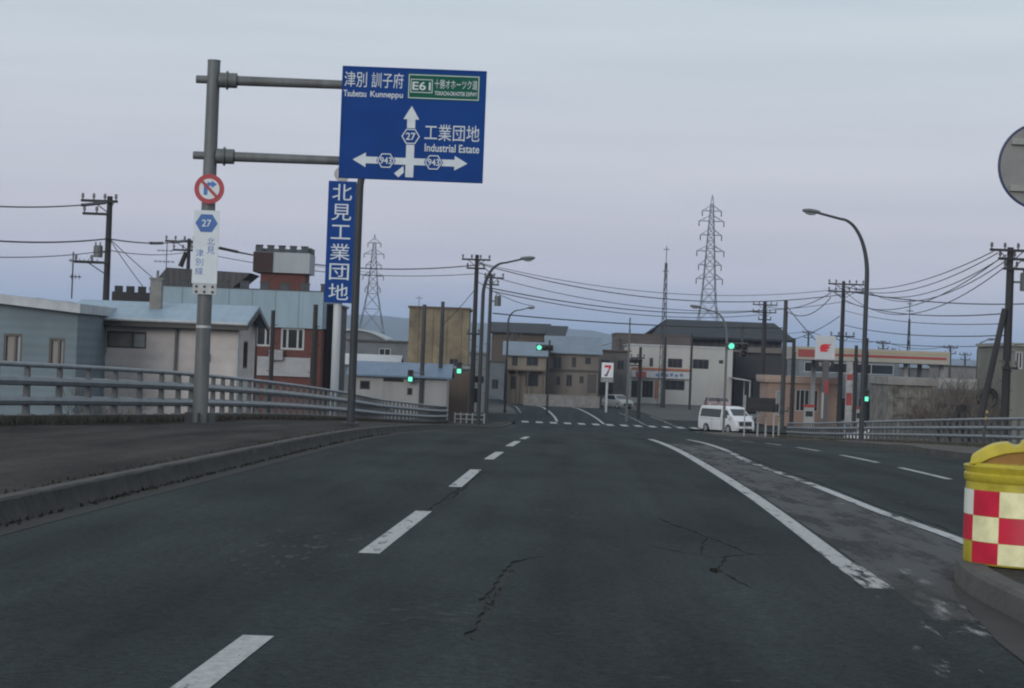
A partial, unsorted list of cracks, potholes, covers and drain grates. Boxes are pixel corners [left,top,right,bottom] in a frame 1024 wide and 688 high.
crack [464,555,546,640]
crack [426,472,485,511]
crack [652,517,784,589]
